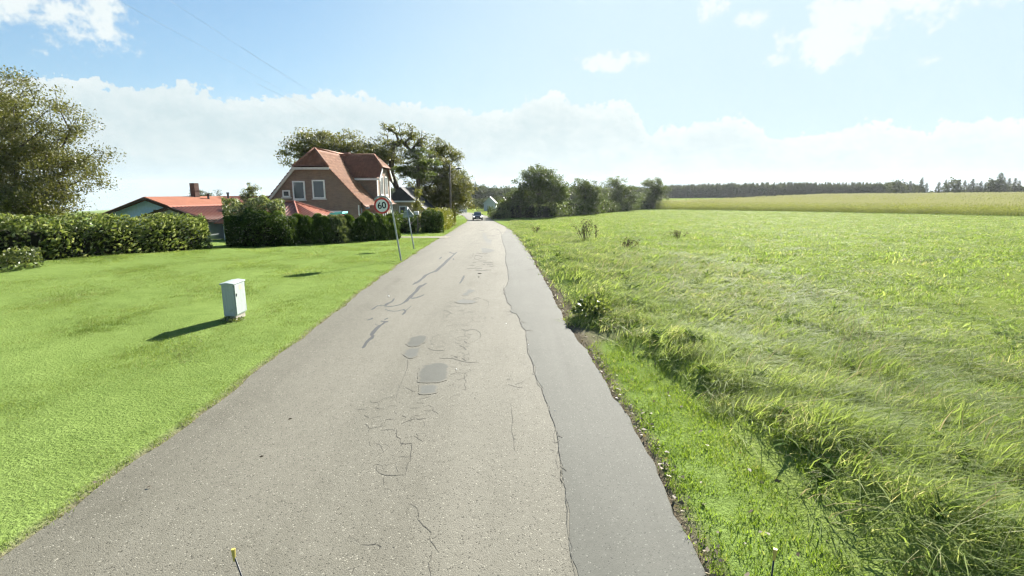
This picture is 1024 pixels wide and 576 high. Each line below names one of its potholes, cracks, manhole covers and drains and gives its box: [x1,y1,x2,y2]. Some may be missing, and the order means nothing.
crack [360,359,437,492]
